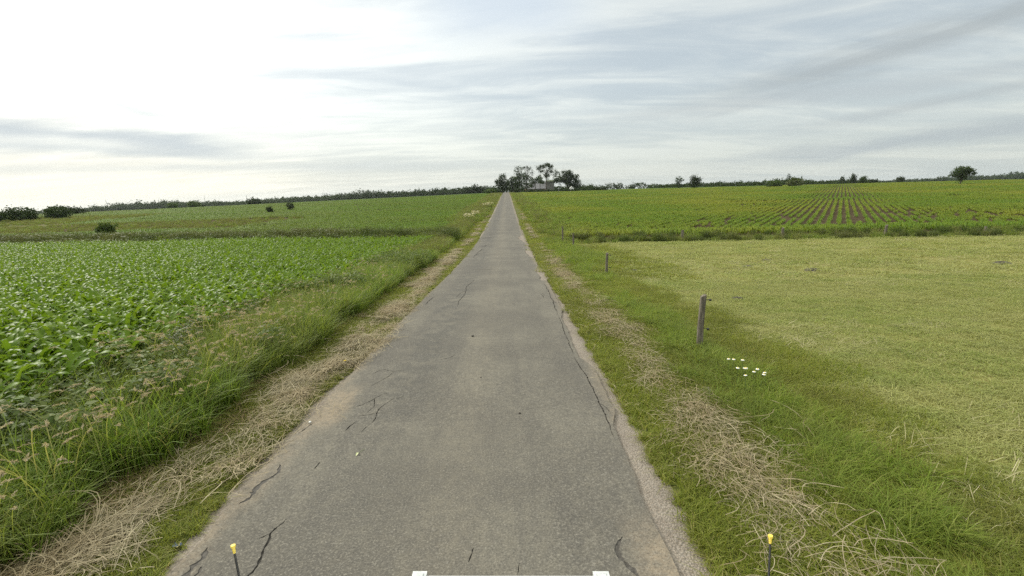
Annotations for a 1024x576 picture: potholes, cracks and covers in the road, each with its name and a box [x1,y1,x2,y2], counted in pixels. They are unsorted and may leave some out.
crack [614,537,639,576]
crack [247,521,285,576]
crack [239,465,281,504]
crack [345,369,407,431]
crack [181,547,209,576]
crack [541,284,614,437]
